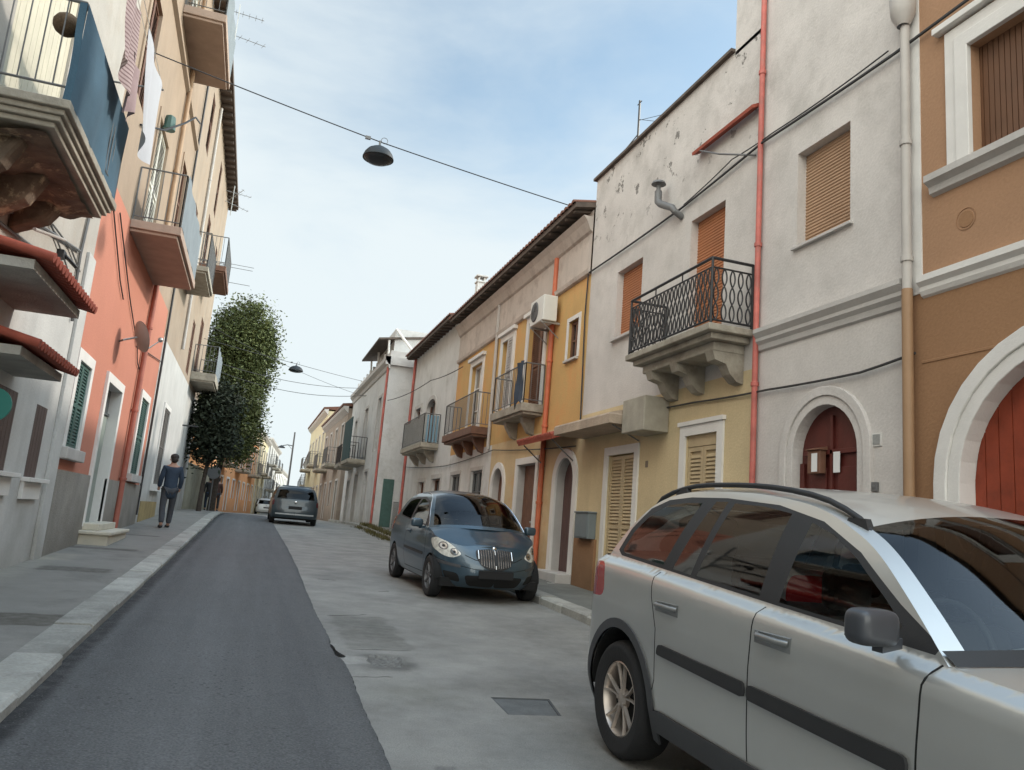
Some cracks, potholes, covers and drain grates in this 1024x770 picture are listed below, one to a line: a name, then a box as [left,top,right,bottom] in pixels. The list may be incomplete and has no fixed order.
manhole cover [491,697,561,716]
